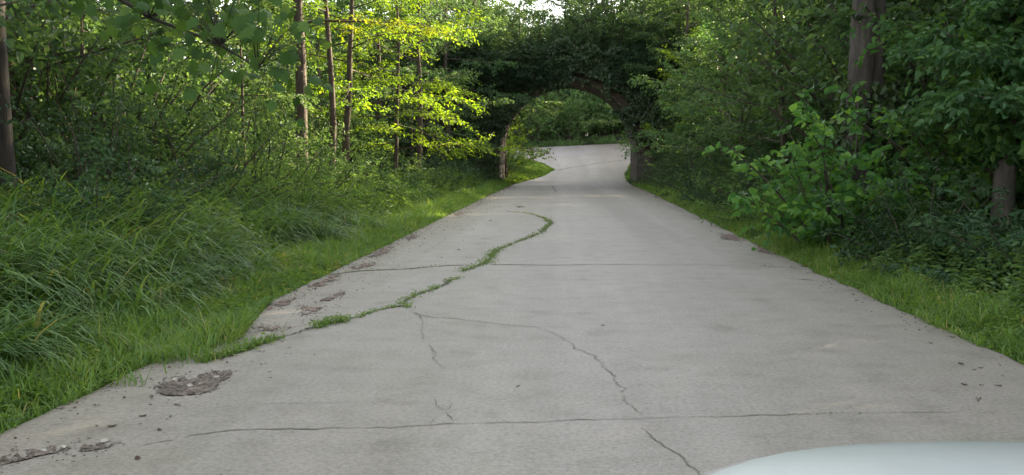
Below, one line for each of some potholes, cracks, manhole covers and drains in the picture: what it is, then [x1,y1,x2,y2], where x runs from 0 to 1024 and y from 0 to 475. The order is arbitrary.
crack [144,211,1024,475]
pothole [0,437,92,469]
pothole [55,437,124,461]
pothole [132,370,236,411]
